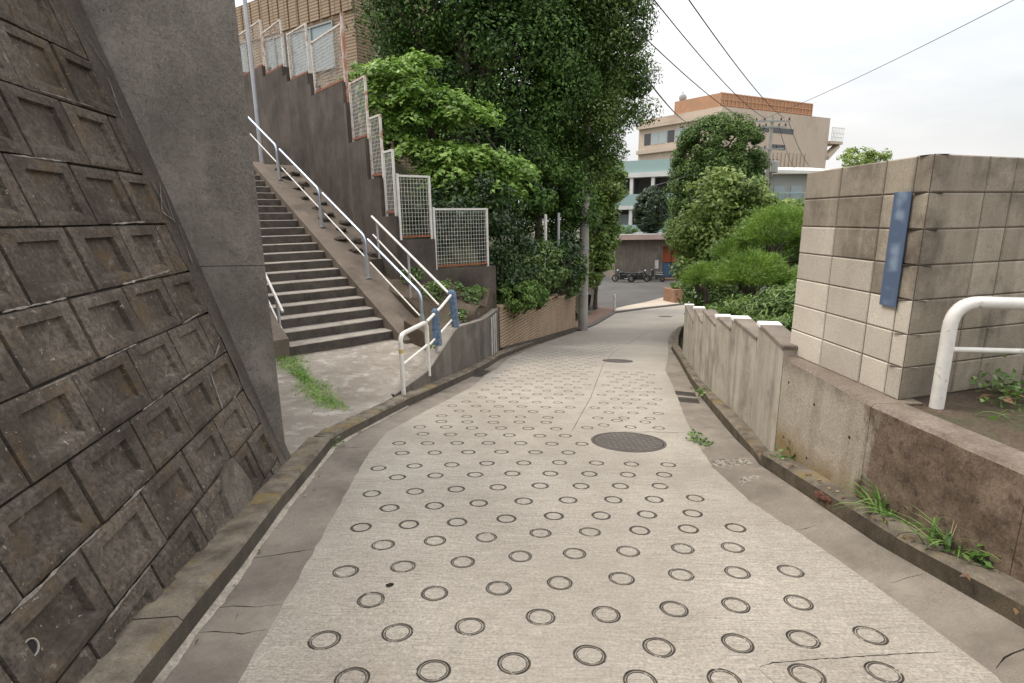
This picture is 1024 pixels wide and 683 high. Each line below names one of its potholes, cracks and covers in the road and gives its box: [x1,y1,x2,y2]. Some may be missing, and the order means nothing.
crack [198,604,279,635]
drain grate [675,391,700,404]
crack [759,652,934,677]
crack [996,648,1024,668]
manhole cover [591,432,667,452]
